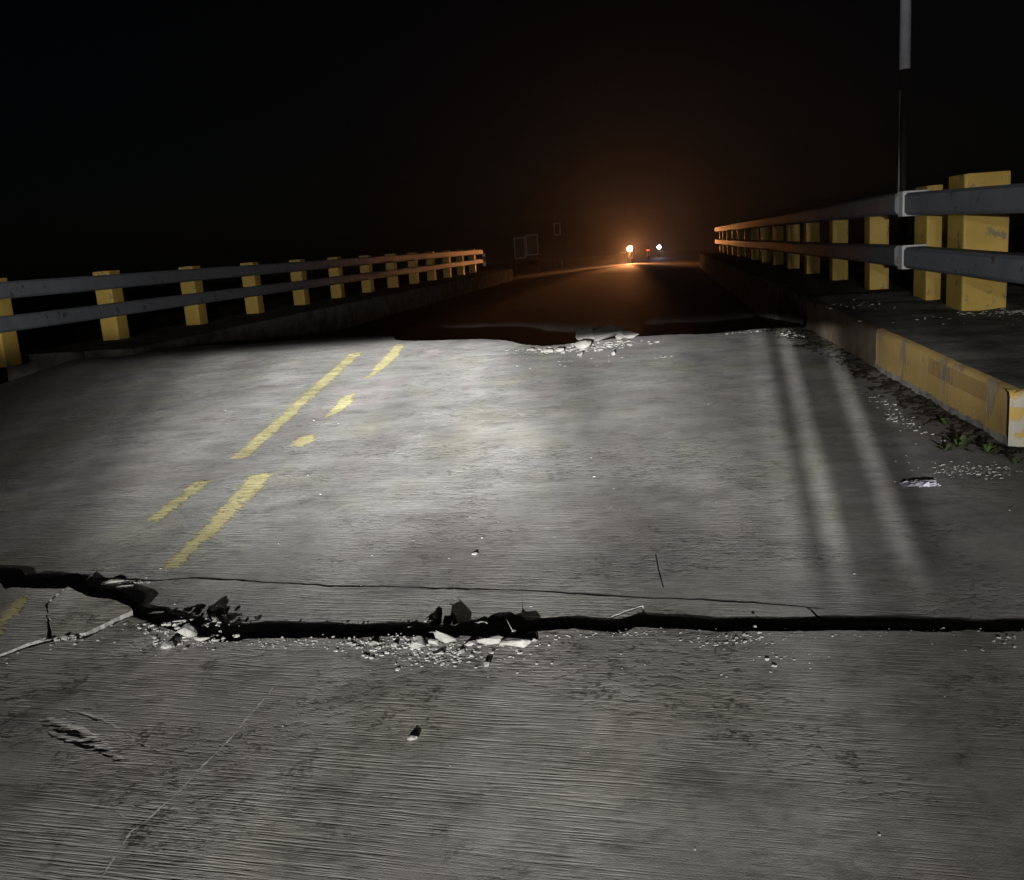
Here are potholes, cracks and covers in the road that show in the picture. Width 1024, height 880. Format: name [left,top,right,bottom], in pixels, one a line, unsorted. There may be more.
crack [0,554,1020,644]
crack [100,688,273,880]
